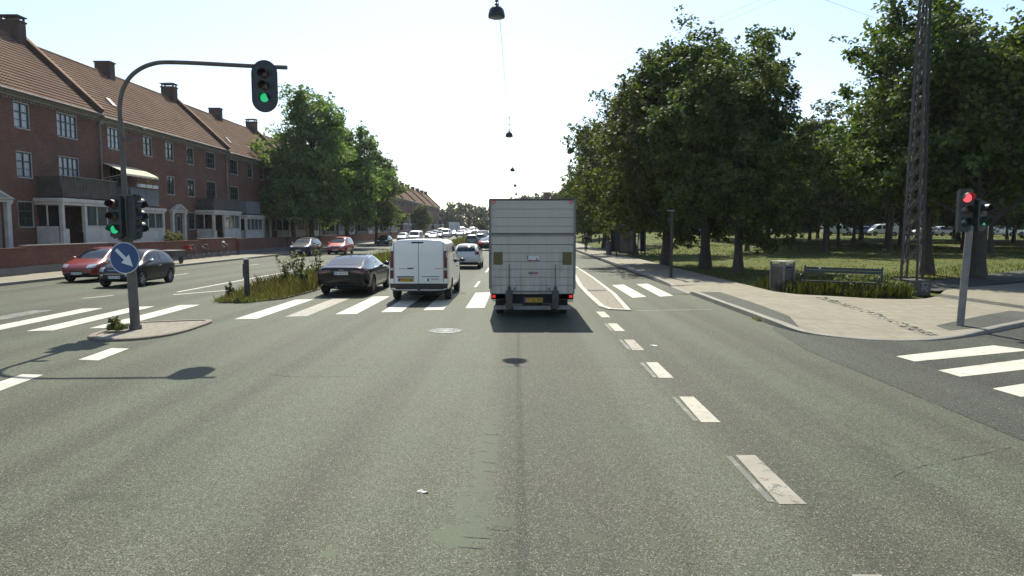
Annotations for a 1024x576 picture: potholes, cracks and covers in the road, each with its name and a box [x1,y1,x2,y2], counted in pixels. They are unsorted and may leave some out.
crack [879,441,1012,477]
